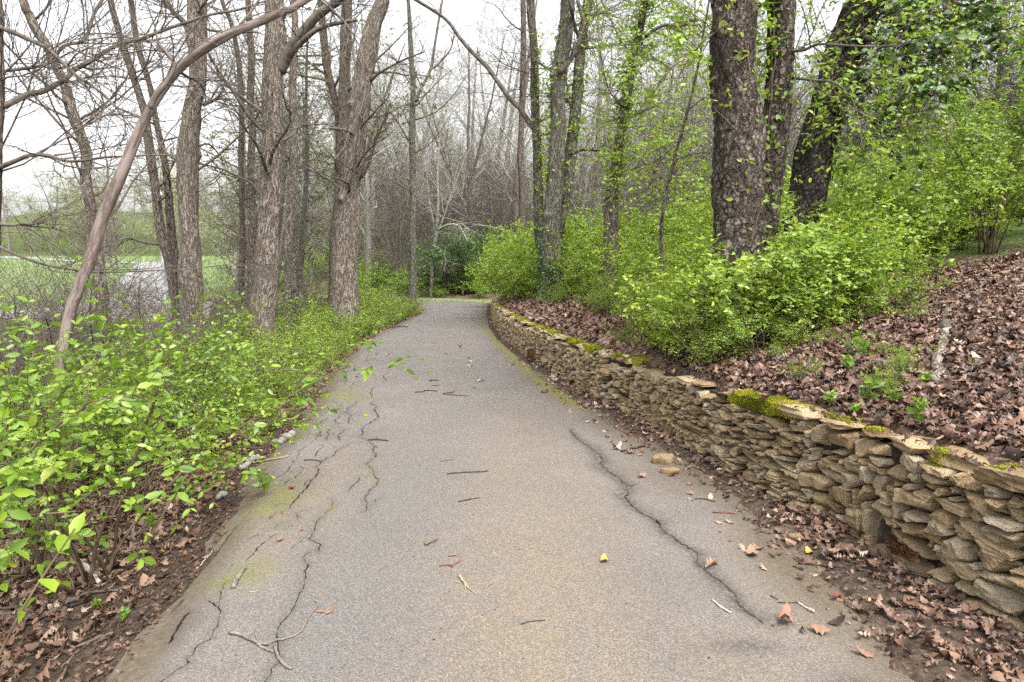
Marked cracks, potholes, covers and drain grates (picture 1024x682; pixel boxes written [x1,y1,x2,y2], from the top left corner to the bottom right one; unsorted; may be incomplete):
crack [160,581,227,682]
crack [570,429,763,623]
crack [219,358,388,682]
